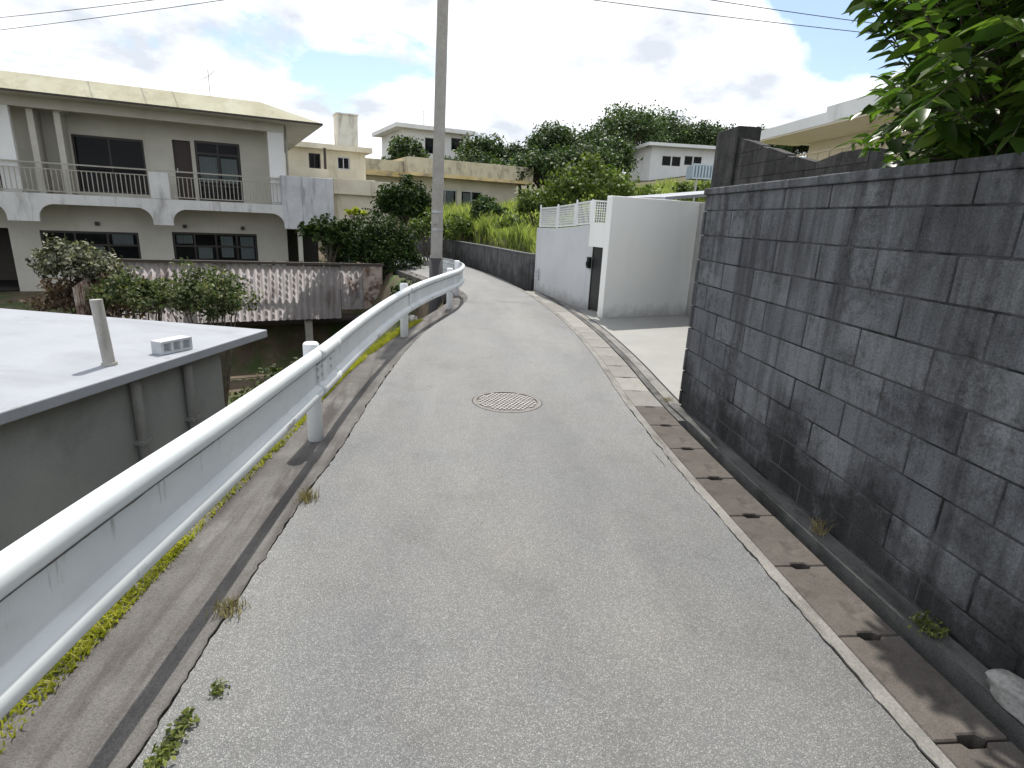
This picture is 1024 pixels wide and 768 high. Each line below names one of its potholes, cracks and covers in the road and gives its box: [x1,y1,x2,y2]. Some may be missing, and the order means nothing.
manhole cover [473,391,542,413]
